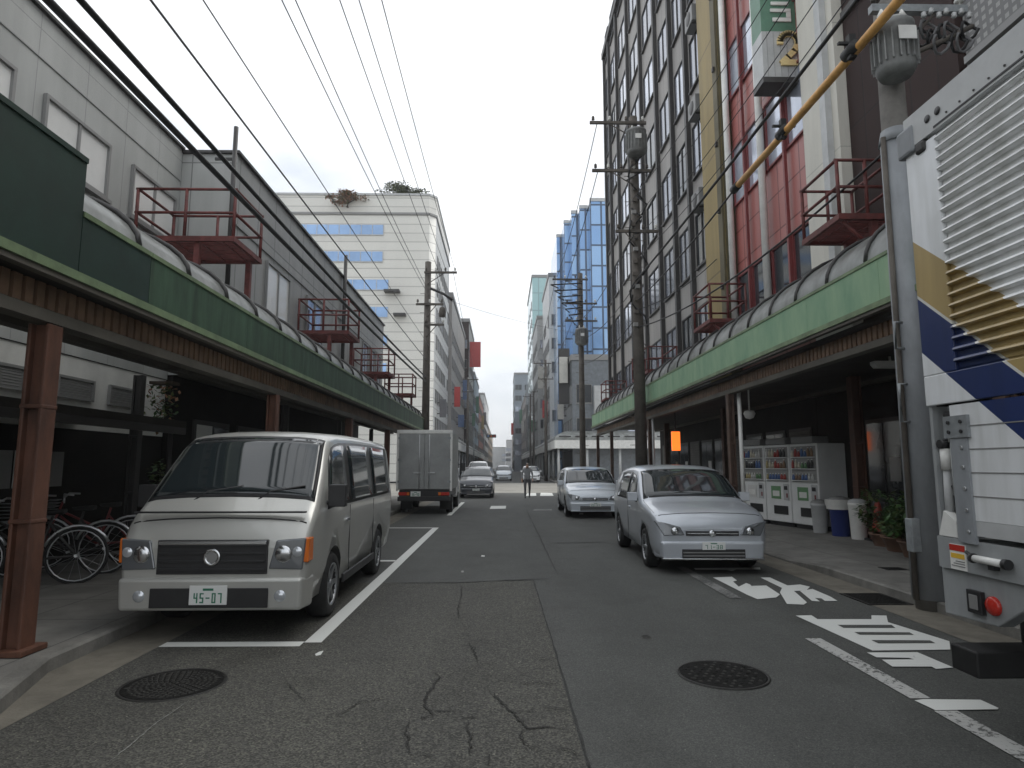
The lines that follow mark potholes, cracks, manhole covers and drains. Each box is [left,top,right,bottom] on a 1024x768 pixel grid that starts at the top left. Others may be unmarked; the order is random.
manhole cover [115,668,228,703]
drain grate [839,593,914,605]
manhole cover [677,660,771,690]
crack [405,670,574,764]
